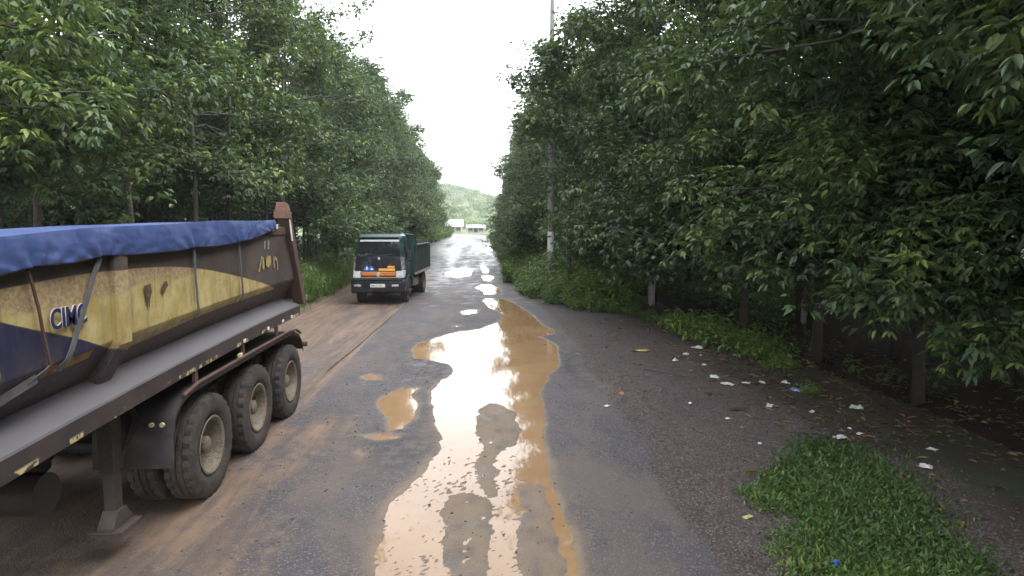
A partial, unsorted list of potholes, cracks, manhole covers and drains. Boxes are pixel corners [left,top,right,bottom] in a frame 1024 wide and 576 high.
pothole [356,297,600,576]
